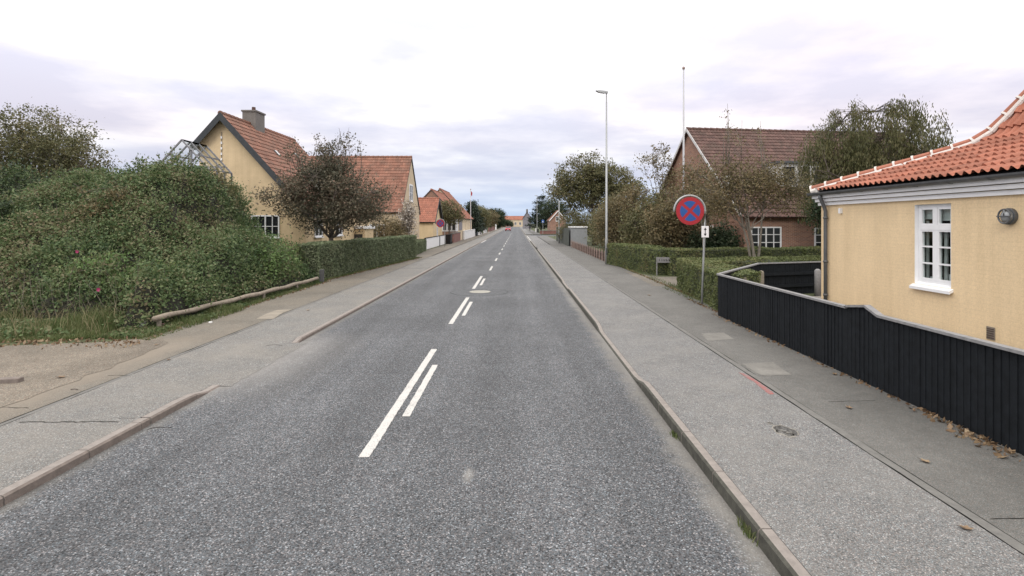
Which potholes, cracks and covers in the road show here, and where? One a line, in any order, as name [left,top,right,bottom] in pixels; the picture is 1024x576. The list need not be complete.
pothole [772,424,799,438]
